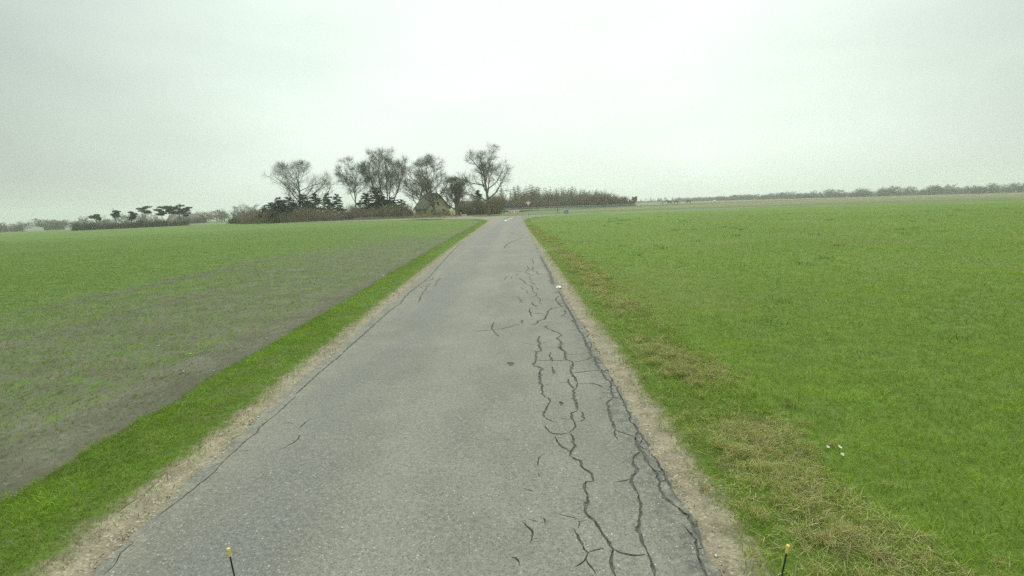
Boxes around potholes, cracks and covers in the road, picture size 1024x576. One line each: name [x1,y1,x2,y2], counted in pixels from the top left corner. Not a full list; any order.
crack [484,257,722,576]
